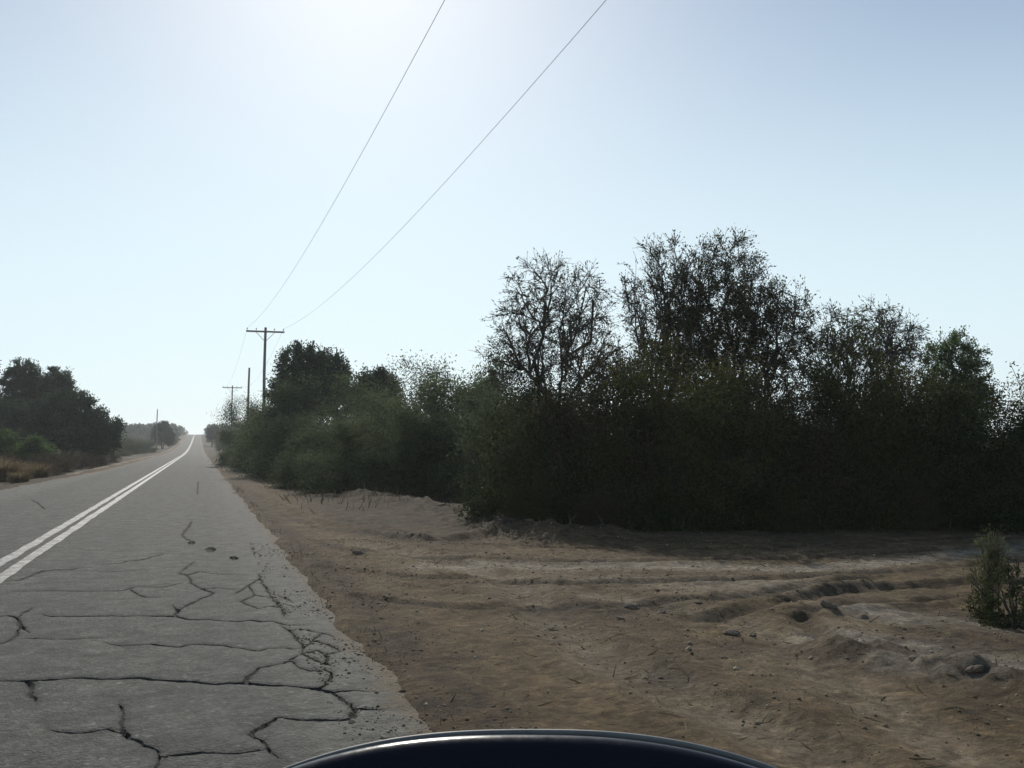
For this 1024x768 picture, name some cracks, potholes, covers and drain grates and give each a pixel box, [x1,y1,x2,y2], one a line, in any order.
crack [0,554,376,768]
